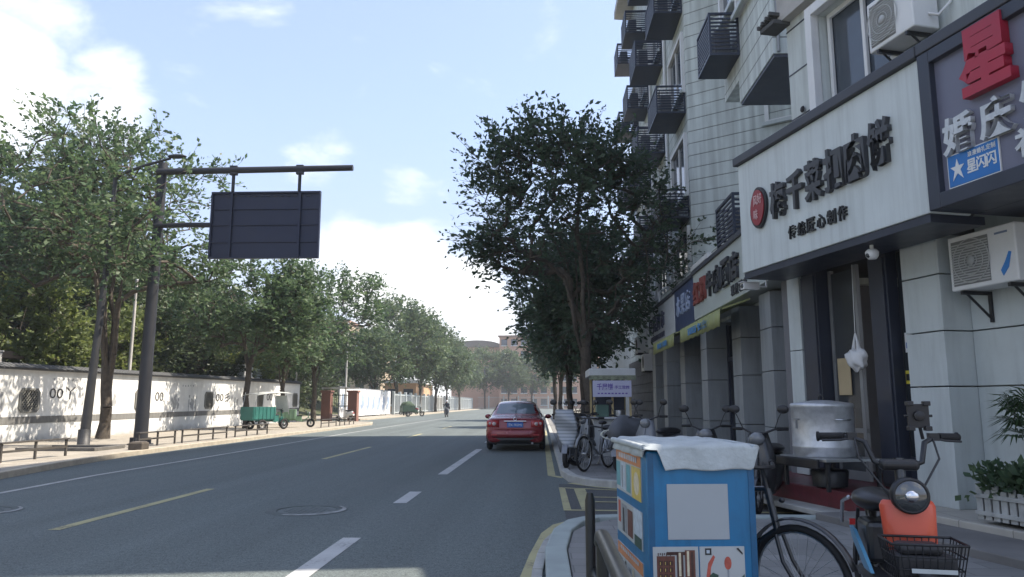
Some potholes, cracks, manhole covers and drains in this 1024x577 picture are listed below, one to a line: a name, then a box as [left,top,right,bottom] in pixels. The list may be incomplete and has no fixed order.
manhole cover [265,505,348,516]
manhole cover [0,506,25,514]
